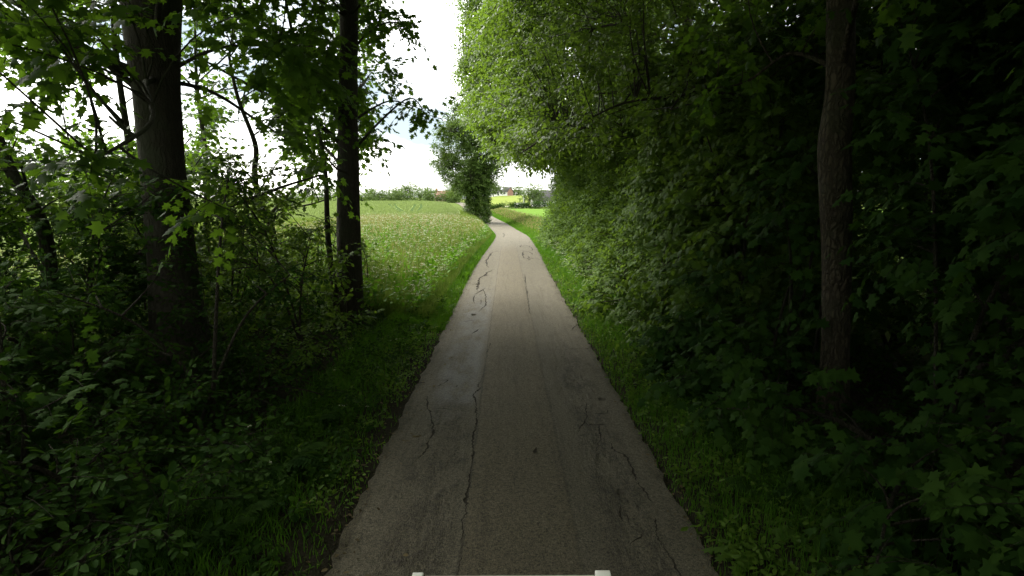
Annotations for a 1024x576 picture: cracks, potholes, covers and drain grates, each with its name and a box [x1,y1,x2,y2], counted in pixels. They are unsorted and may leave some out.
crack [577,402,681,576]
crack [394,233,540,571]
